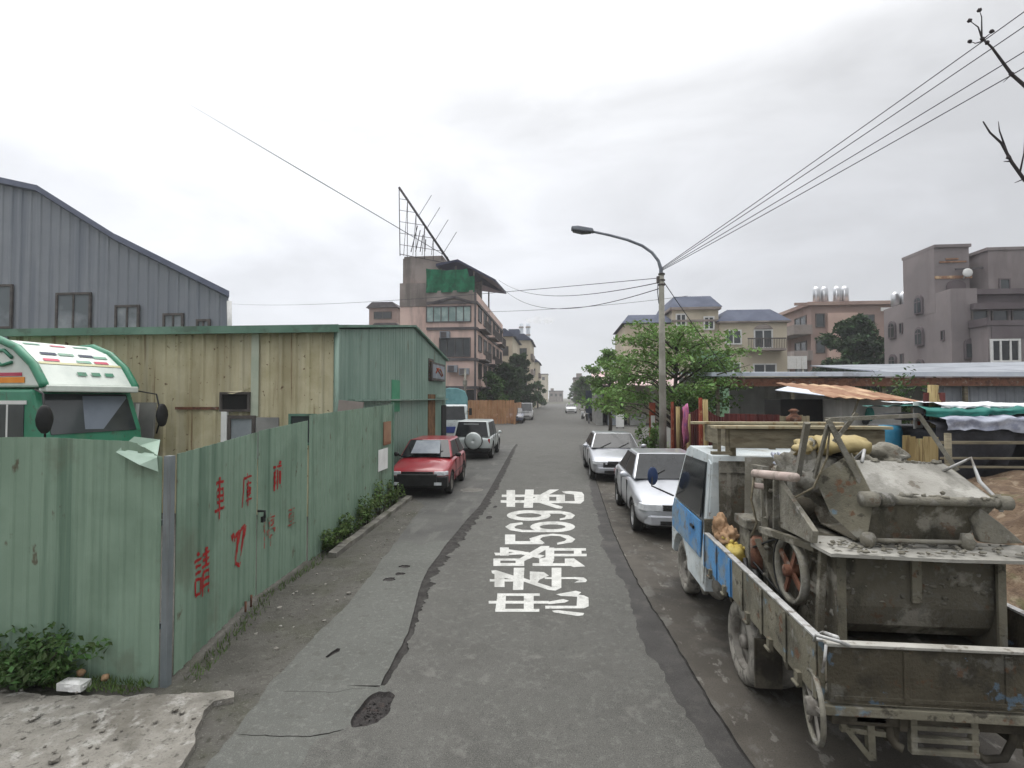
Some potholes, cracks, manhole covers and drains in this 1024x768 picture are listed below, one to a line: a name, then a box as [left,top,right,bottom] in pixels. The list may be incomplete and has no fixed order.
crack [238,729,344,737]
pothole [351,691,395,727]
